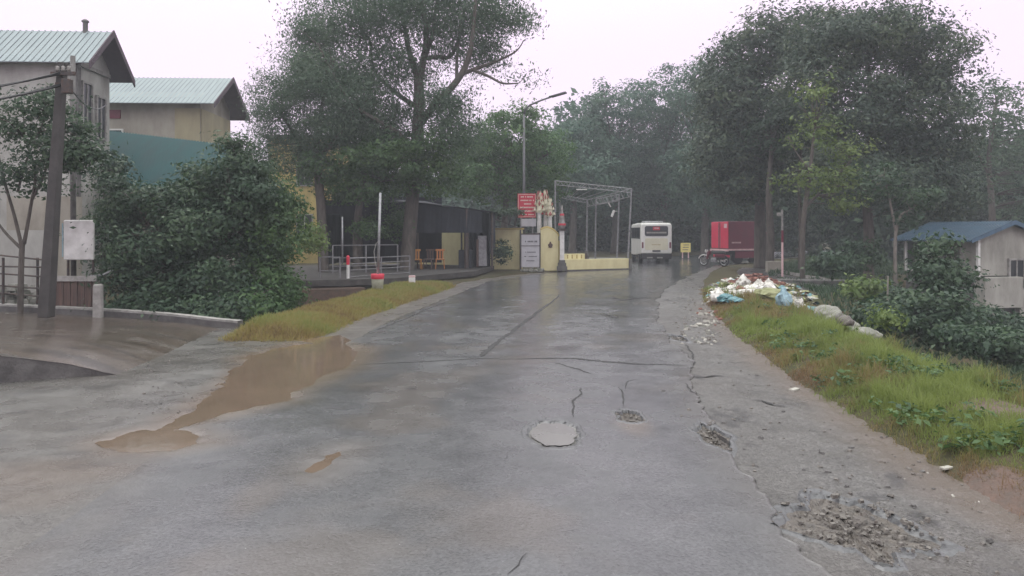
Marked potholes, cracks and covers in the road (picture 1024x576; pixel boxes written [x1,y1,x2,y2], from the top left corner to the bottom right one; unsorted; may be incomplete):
pothole [610,408,648,424]
pothole [688,419,738,457]
pothole [764,488,966,573]
